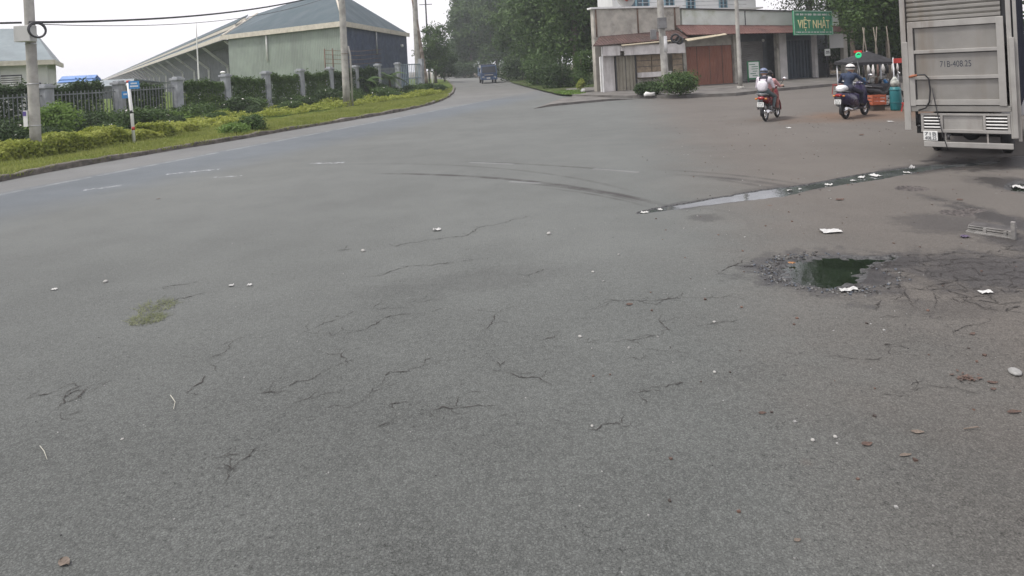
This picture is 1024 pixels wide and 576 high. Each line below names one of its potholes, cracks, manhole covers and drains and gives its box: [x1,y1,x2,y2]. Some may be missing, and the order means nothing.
drain grate [965,221,1017,240]
crack [599,293,729,359]
crack [854,244,1024,332]
crack [214,446,270,481]
pothole [778,254,901,289]
crack [256,295,490,426]
crack [494,361,562,385]
crack [589,382,686,430]
crack [30,378,112,420]
